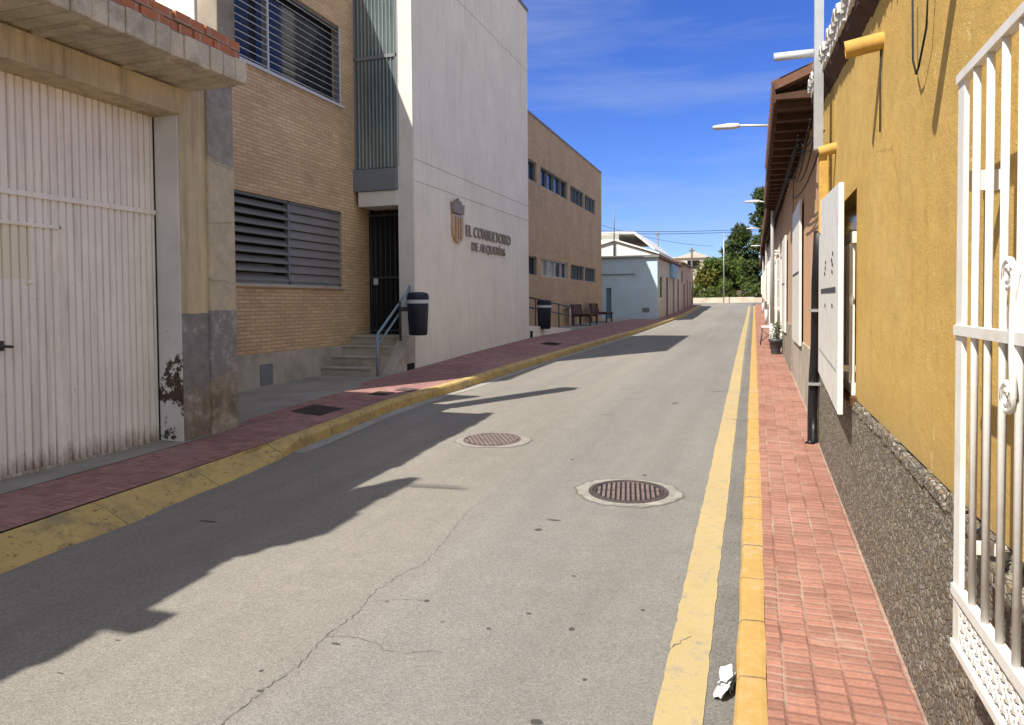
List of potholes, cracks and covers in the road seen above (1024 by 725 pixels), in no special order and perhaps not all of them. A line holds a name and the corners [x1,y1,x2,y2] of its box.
utility cover [291,404,343,416]
crack [221,489,500,725]
manhole cover [573,478,685,509]
manhole cover [454,432,533,448]
